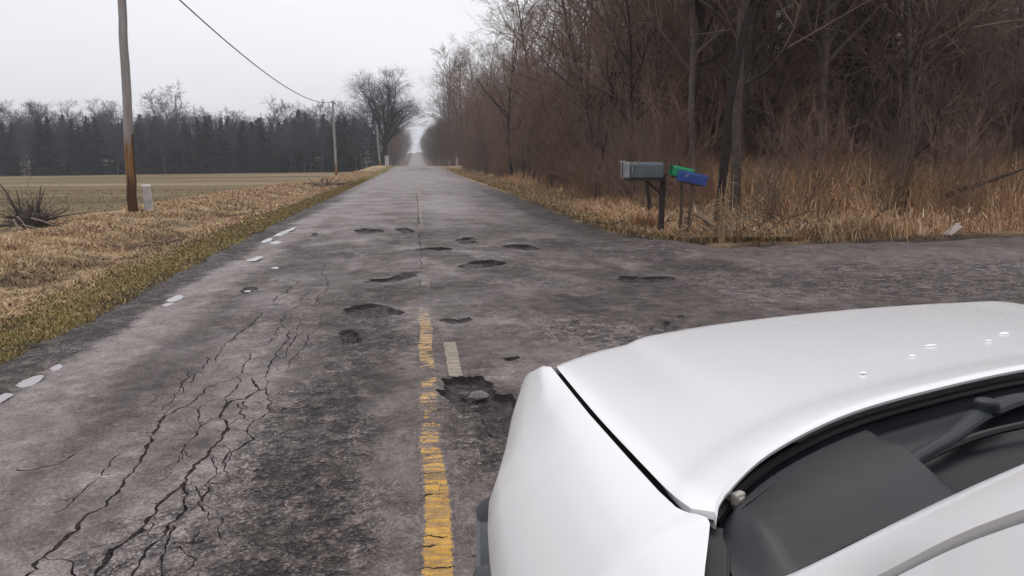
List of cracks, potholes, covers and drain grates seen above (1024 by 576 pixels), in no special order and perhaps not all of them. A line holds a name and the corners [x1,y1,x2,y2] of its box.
pothole [335,330,362,345]
crack [16,264,331,576]
pothole [457,260,506,269]
pothole [436,376,517,439]
pothole [342,303,404,319]
pothole [362,271,422,283]
